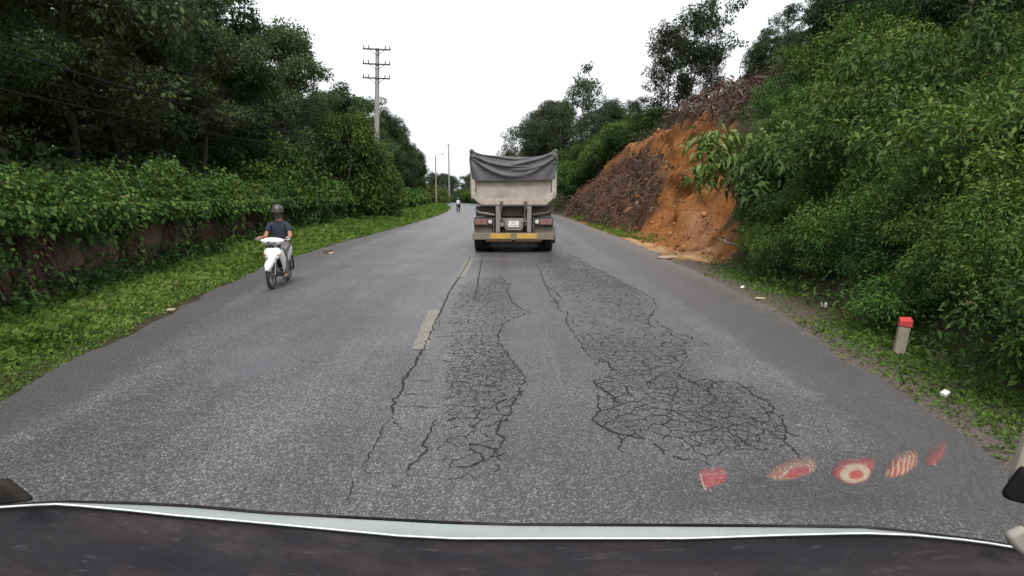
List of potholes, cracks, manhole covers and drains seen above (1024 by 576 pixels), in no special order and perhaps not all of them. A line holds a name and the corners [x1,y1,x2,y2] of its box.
crack [347,258,531,505]
crack [537,252,802,464]
